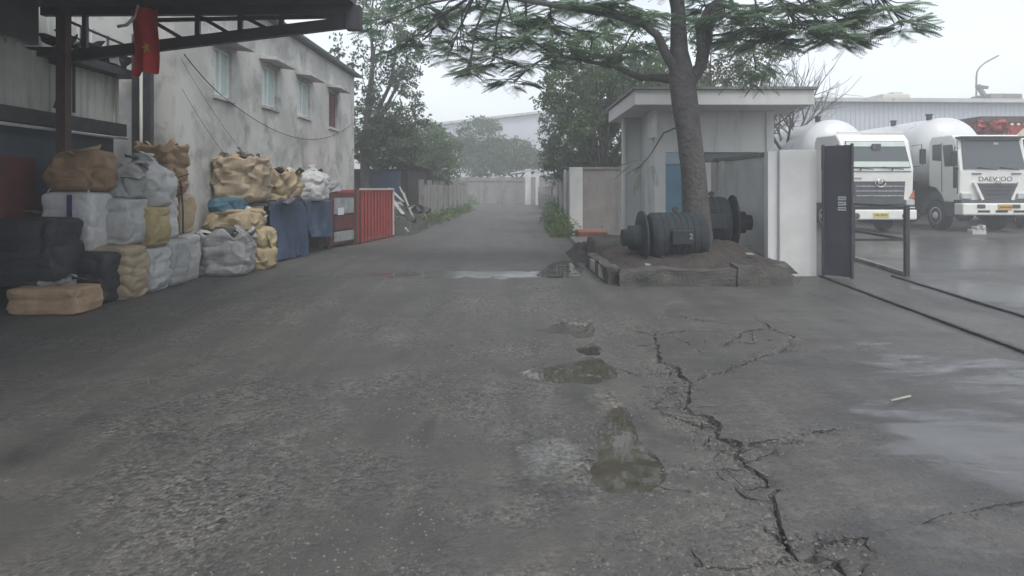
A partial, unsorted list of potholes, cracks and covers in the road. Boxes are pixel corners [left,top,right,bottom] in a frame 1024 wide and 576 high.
pothole [525,357,618,385]
crack [622,315,1024,576]
pothole [574,342,602,356]
pothole [537,322,595,338]
pothole [537,260,584,278]
pothole [582,406,668,497]
